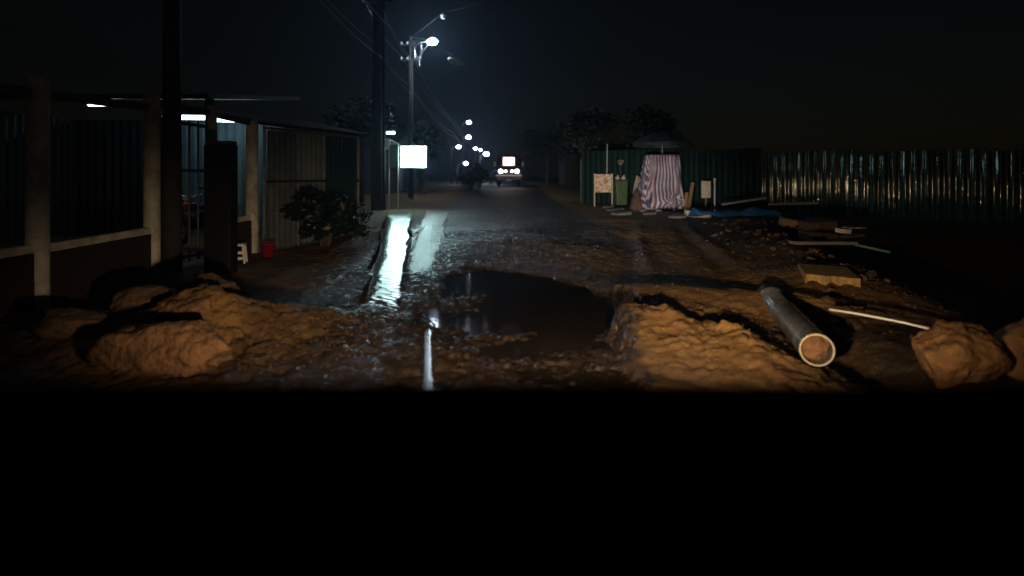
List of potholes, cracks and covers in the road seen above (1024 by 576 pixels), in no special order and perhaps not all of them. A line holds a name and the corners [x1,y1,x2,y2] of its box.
pothole [366,267,655,380]
